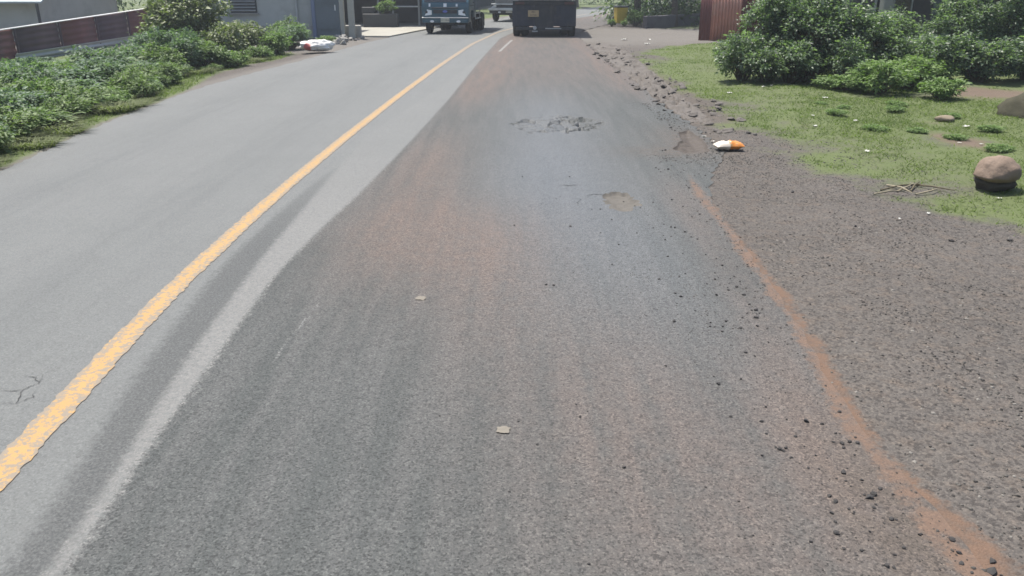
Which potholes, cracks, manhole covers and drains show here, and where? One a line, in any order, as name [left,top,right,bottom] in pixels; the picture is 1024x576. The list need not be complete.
pothole [602,192,642,212]
pothole [509,114,611,134]
pothole [673,130,710,153]
